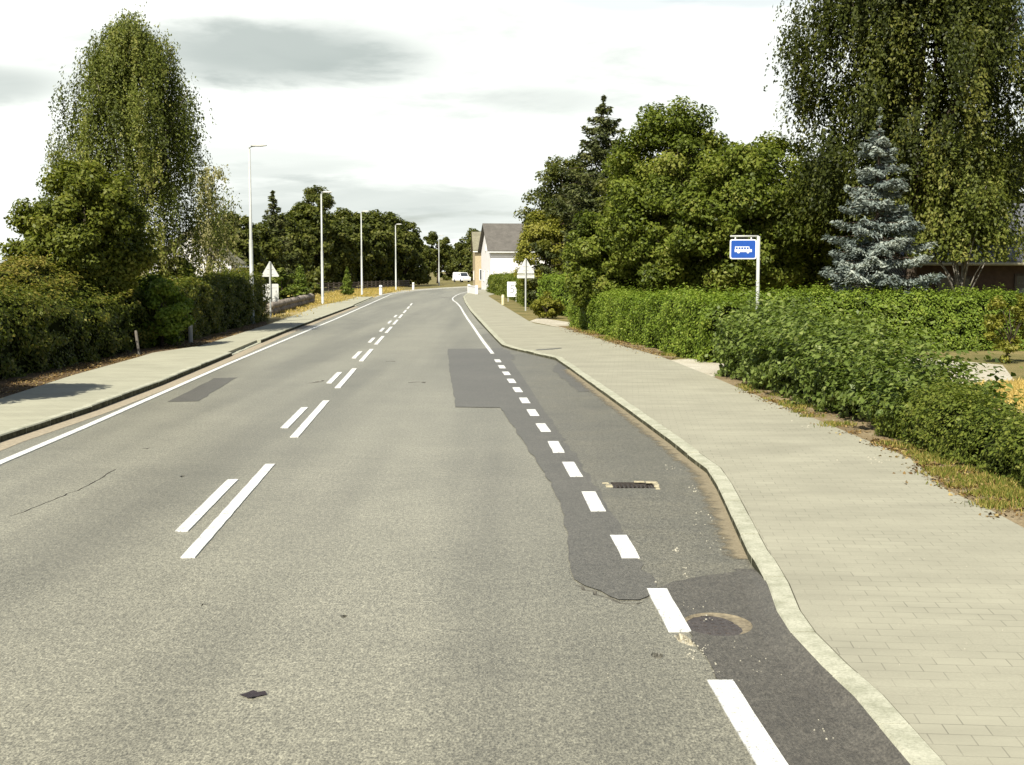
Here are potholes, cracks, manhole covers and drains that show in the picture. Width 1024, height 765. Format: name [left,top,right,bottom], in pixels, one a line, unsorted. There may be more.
drain grate [602,481,660,489]
manhole cover [684,613,753,636]
crack [15,469,116,515]
